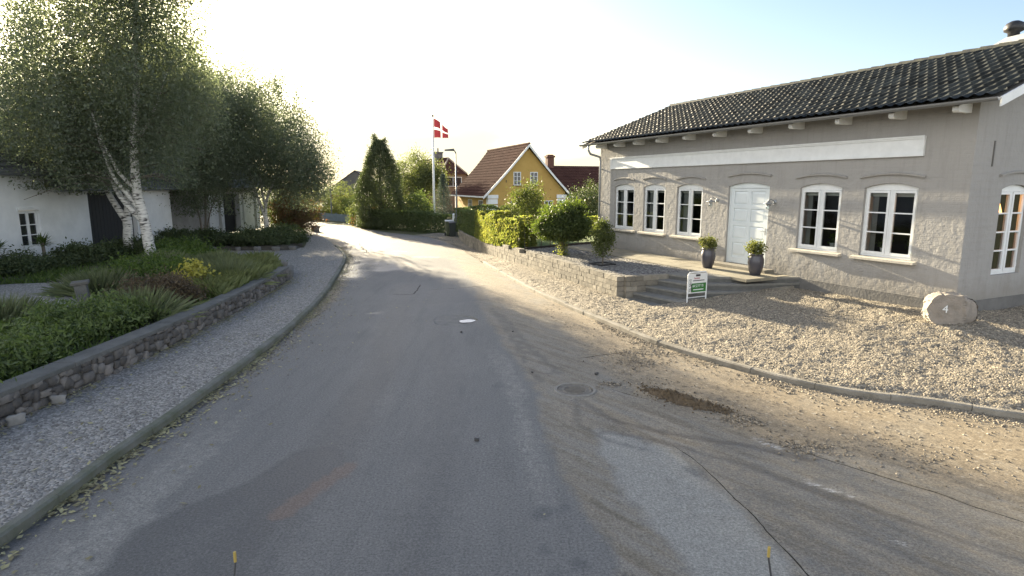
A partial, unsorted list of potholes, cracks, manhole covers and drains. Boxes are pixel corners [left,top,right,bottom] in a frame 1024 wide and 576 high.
manhole cover [554,382,596,397]
